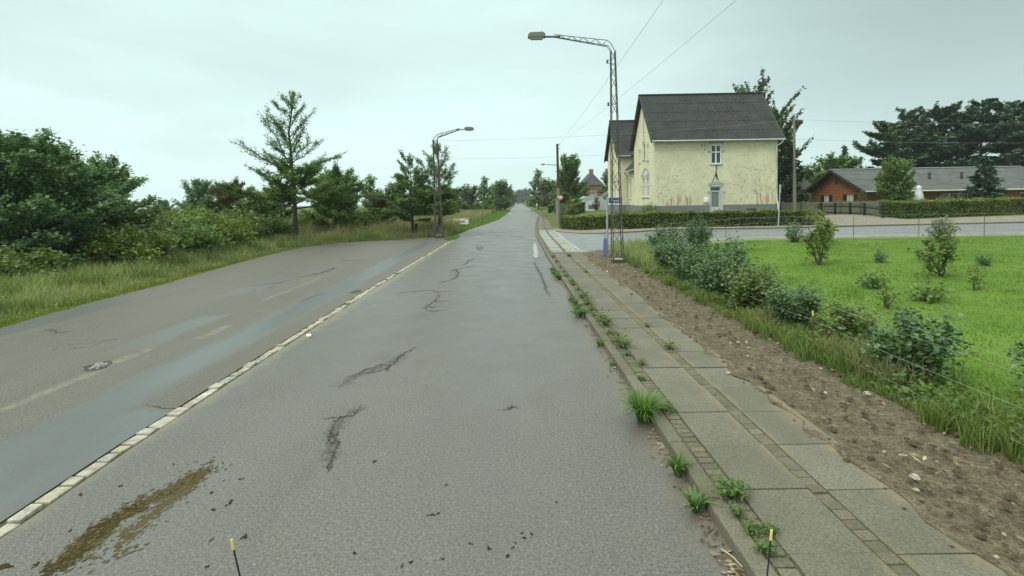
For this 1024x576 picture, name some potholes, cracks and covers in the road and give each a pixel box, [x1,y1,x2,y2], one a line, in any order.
pothole [83,360,112,371]
crack [348,347,416,378]
crack [399,247,480,311]
crack [322,405,363,472]
